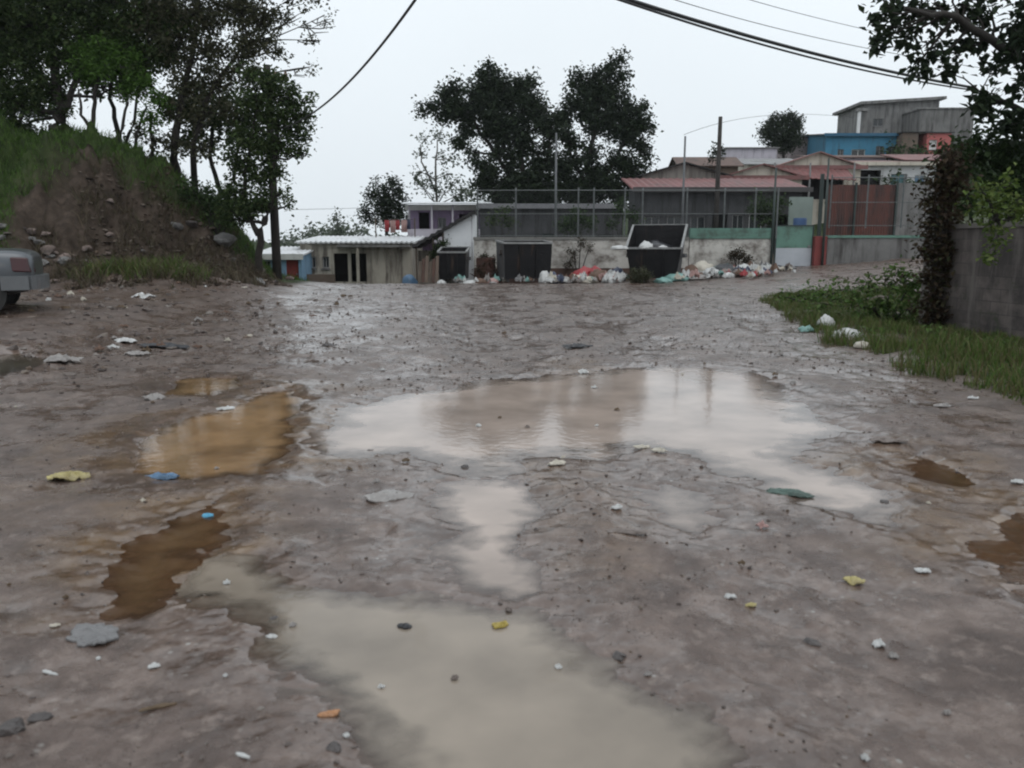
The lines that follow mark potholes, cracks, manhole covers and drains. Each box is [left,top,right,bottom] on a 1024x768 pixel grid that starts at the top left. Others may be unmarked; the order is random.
pothole [144,372,258,396]
pothole [871,446,1007,500]
pothole [101,381,326,486]
pothole [910,496,1024,625]
pothole [58,492,265,634]
